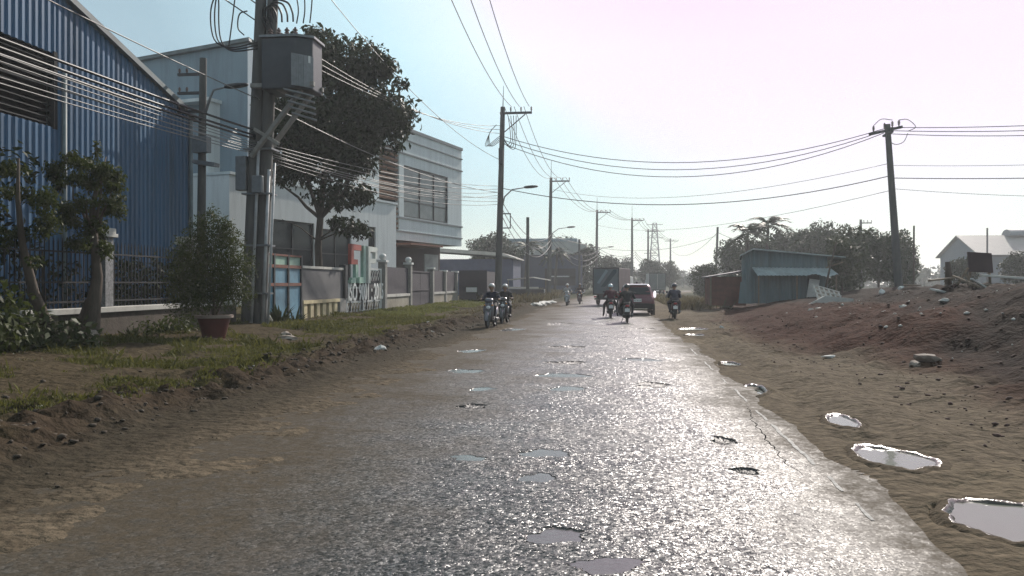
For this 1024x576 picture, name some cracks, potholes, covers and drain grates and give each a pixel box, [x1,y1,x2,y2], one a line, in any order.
crack [747,406,812,482]
pothole [929,497,1024,547]
pothole [819,412,868,431]
pothole [843,443,953,474]
pothole [523,526,585,544]
pothole [516,448,570,457]
pothole [743,383,772,398]
pothole [567,557,649,575]
pothole [710,436,738,446]
pothole [515,472,556,482]
pothole [728,467,761,475]
